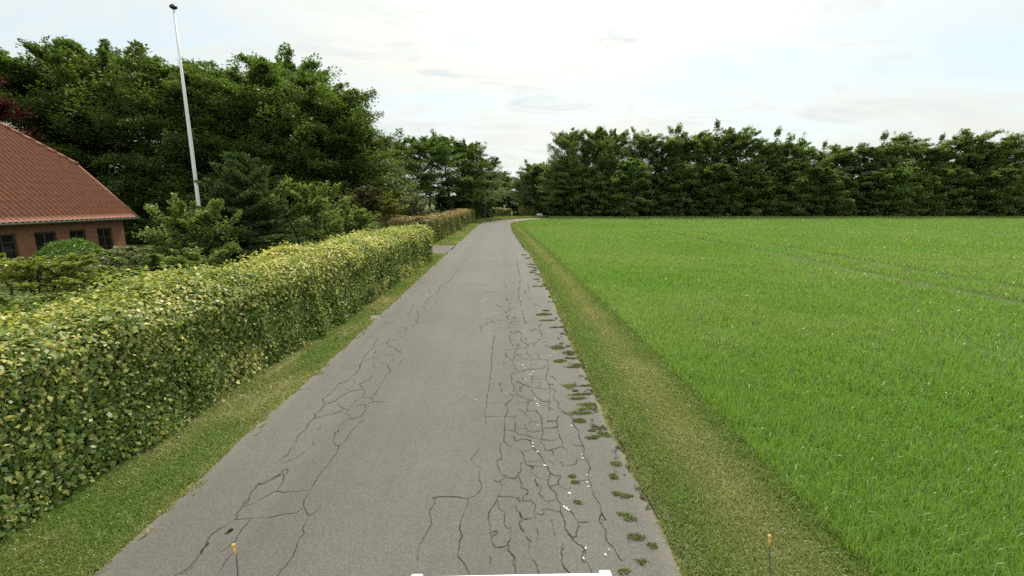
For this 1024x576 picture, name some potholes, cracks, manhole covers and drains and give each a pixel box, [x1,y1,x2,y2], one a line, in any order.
crack [174,257,467,576]
crack [417,259,623,575]
